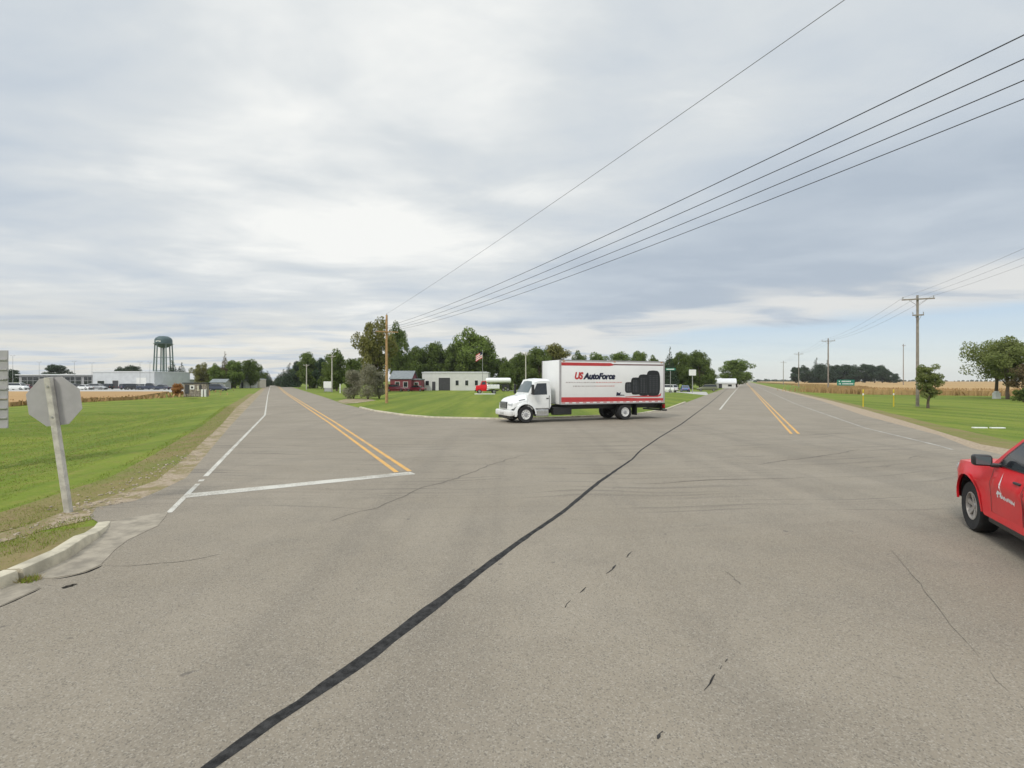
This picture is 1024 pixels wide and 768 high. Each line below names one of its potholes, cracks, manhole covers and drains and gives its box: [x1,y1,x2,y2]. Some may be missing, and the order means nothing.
crack [891,550,1024,709]
crack [0,554,218,607]
